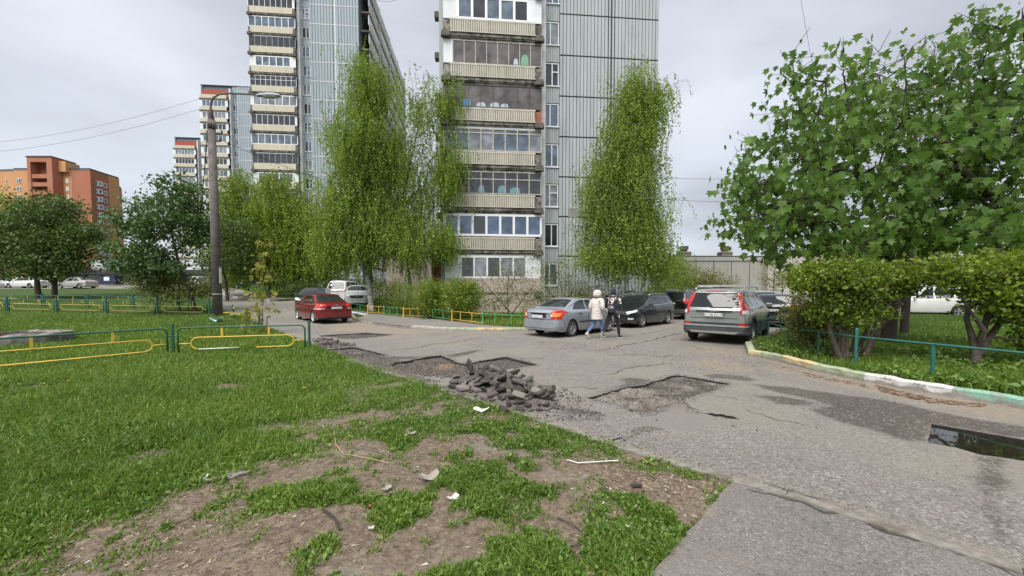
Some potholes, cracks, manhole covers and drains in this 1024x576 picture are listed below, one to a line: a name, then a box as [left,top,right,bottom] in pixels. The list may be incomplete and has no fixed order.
pothole [589,375,729,413]
crack [561,328,703,389]
pothole [928,424,1024,442]
pothole [392,355,536,377]
